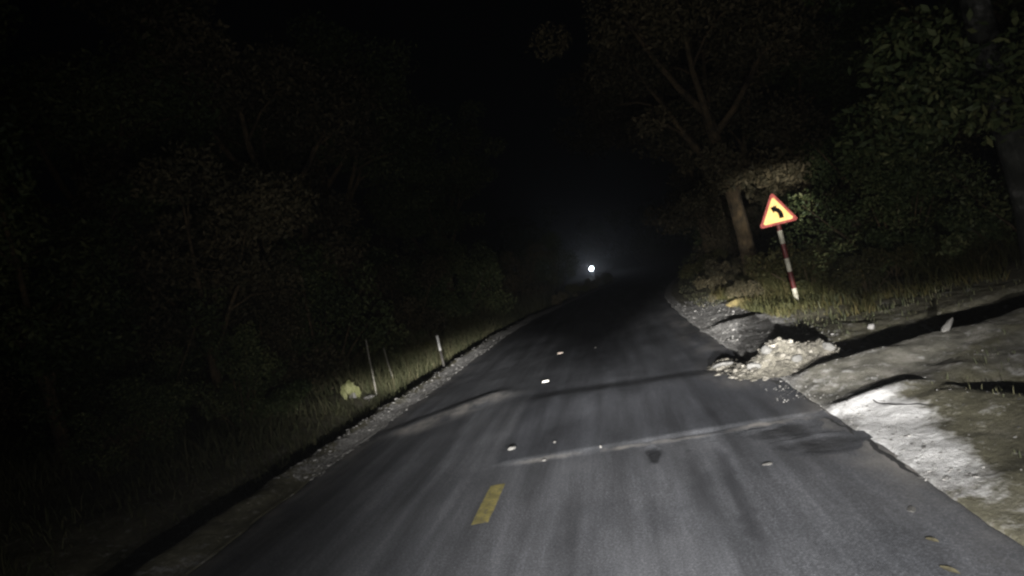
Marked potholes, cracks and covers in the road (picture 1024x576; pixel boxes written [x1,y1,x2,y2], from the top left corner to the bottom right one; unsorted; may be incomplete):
pothole [643,444,664,464]
